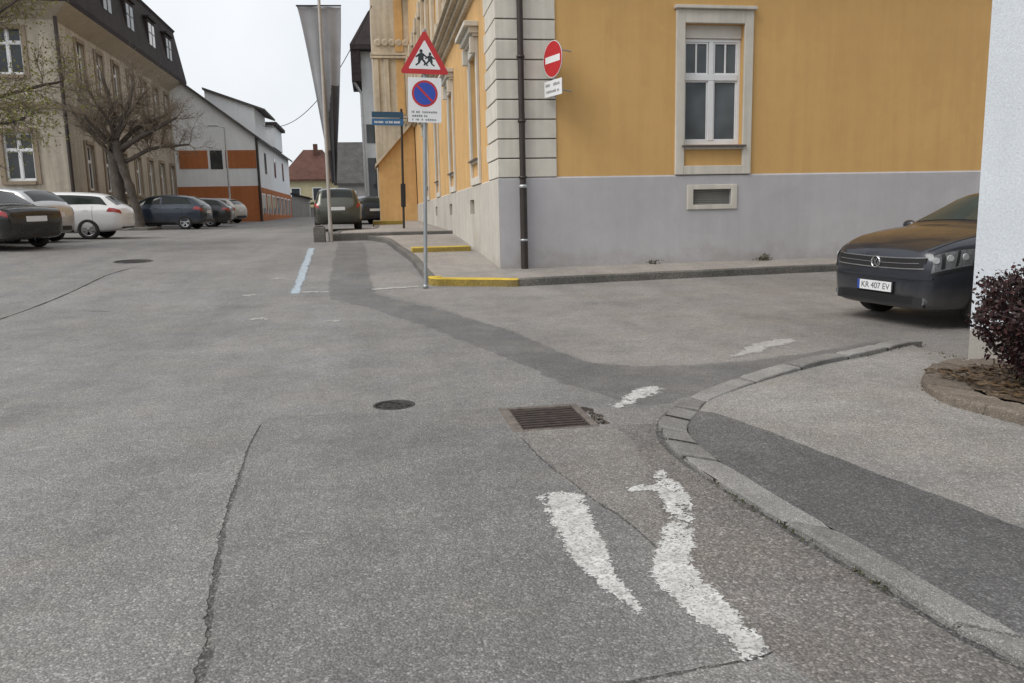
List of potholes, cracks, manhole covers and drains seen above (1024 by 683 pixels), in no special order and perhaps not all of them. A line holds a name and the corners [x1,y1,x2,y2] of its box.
drain grate [498,403,599,432]
manhole cover [373,400,415,410]
crack [192,413,371,683]
crack [0,266,138,320]
